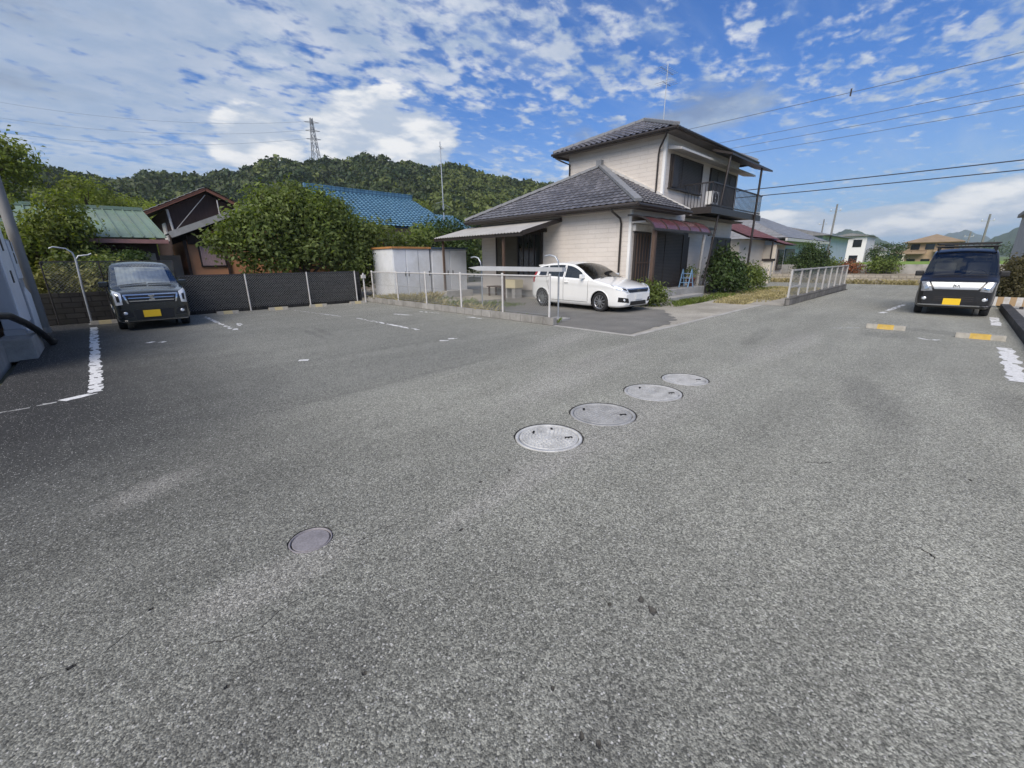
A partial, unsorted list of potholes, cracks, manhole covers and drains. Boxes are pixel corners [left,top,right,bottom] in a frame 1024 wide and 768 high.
manhole cover [514,424,584,452]
manhole cover [661,373,710,386]
crack [29,622,152,683]
manhole cover [287,526,333,554]
manhole cover [623,384,684,401]
manhole cover [569,403,638,426]
crack [194,592,312,646]
